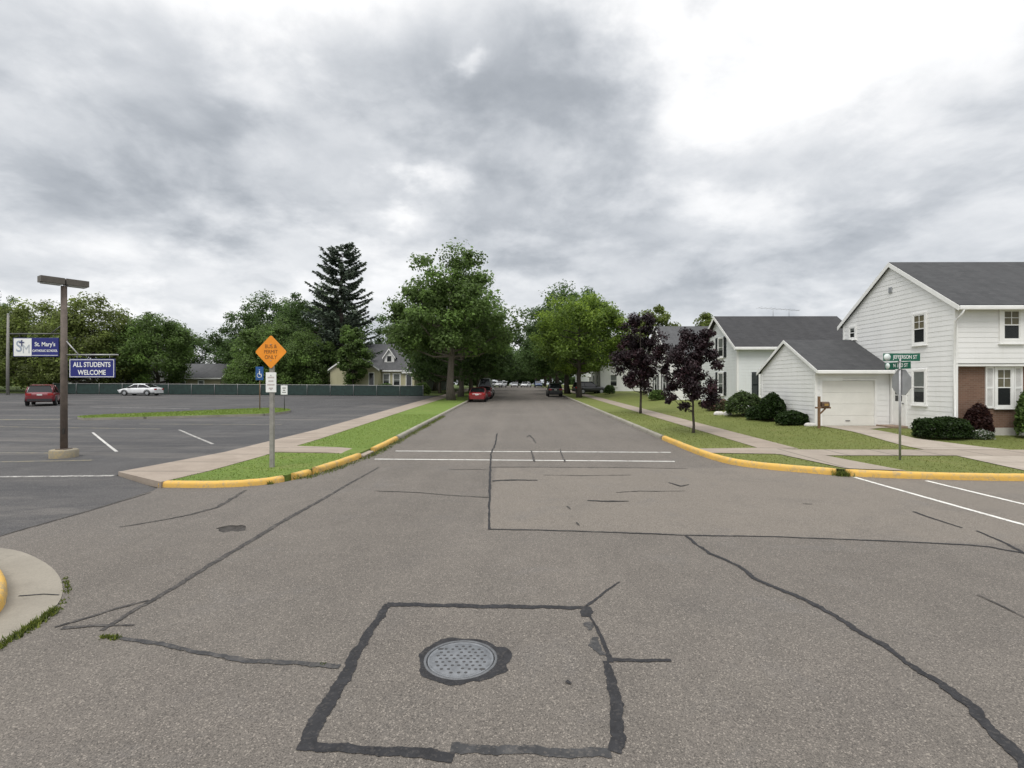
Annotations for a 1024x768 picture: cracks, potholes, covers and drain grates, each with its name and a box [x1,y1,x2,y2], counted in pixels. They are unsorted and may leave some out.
crack [912,511,1023,552]
crack [121,490,246,527]
manhole cover [419,637,512,686]
